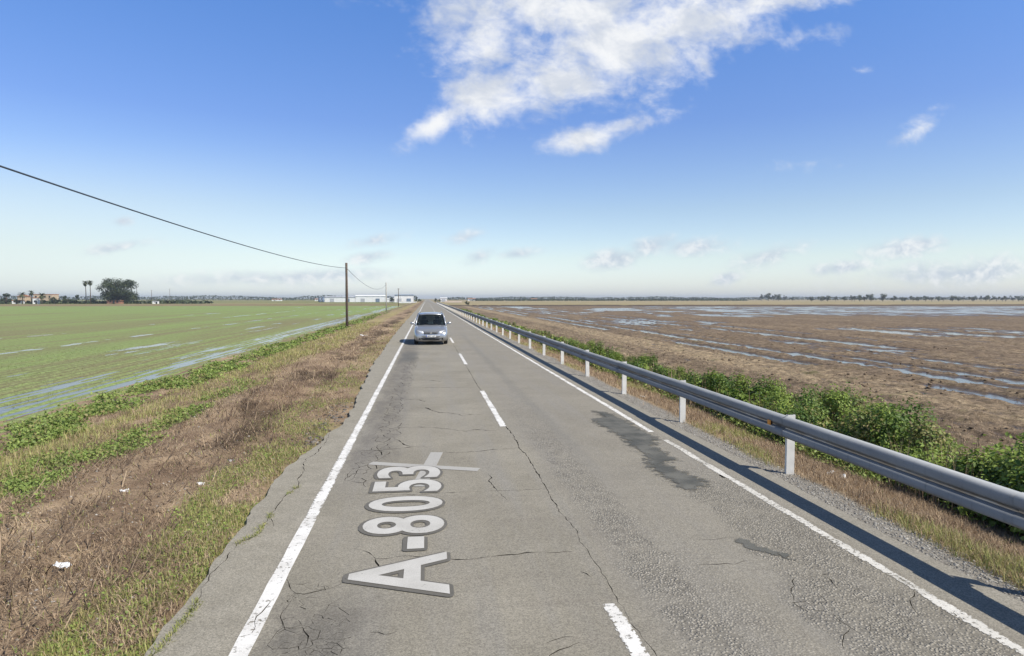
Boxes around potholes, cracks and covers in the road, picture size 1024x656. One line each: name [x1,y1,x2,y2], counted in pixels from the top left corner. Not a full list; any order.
crack [253,579,353,655]
crack [790,556,890,648]
crack [345,346,657,656]
